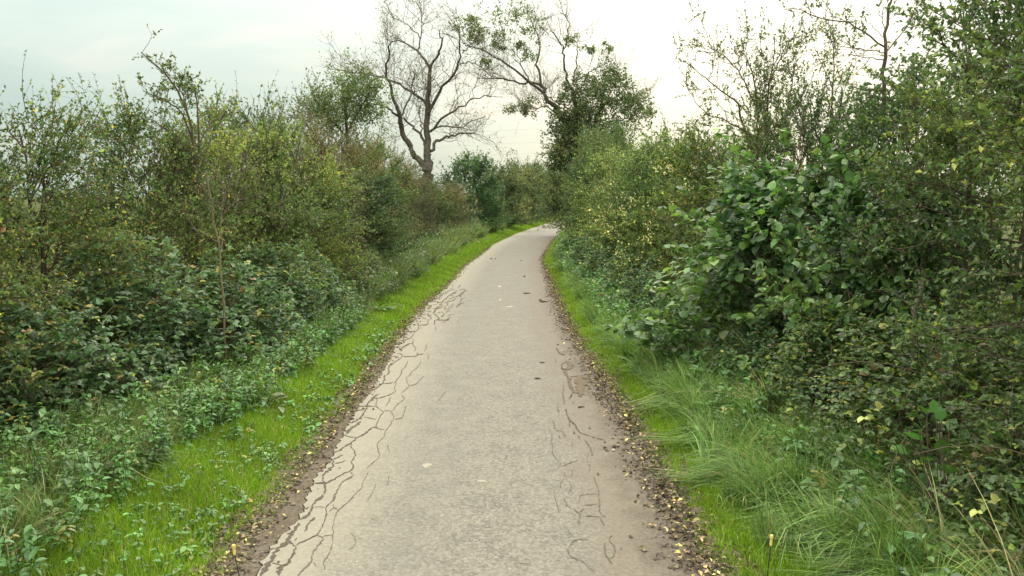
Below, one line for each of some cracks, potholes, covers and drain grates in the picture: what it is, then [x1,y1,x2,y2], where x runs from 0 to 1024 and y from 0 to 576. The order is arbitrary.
pothole [574,374,589,396]
crack [260,285,467,576]
crack [551,348,615,571]
